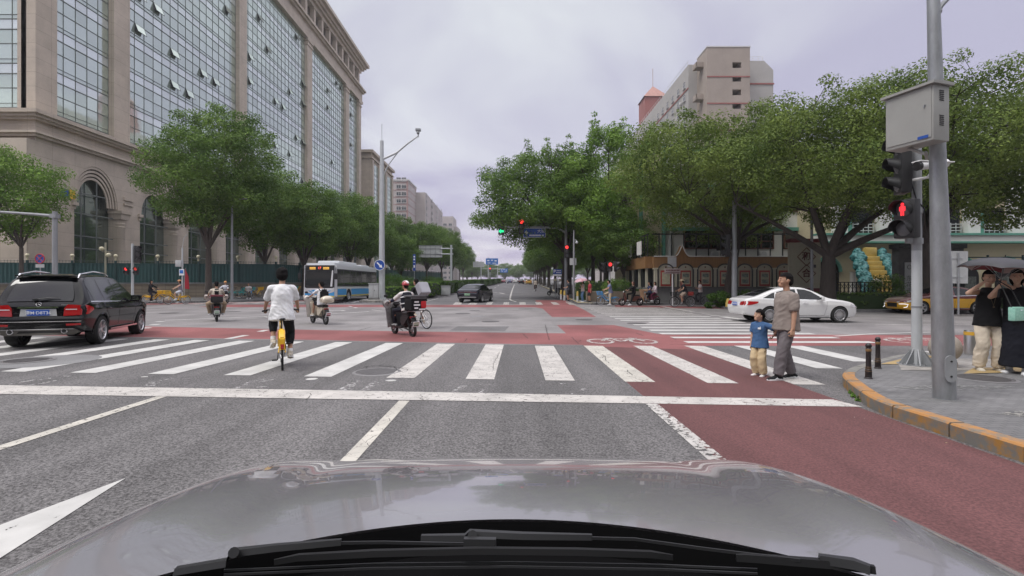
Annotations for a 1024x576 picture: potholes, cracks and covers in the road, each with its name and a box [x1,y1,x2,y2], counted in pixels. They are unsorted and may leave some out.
manhole cover [957,373,1021,383]
manhole cover [352,368,401,376]
